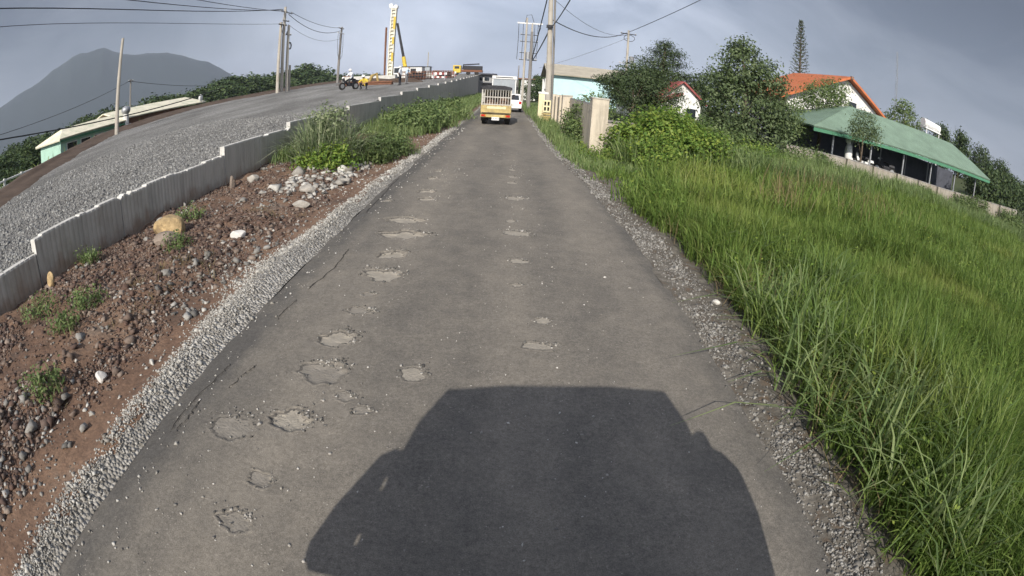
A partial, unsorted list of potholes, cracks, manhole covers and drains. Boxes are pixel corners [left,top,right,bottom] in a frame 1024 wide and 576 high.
pothole [263,403,327,434]
pothole [497,229,536,237]
pothole [505,257,533,265]
pothole [206,406,264,444]
pothole [342,305,380,315]
pothole [395,363,432,383]
pothole [358,264,409,283]
pothole [212,505,257,537]
pothole [291,357,357,387]
crack [278,249,349,320]
pothole [382,215,429,224]
pothole [530,316,555,326]
